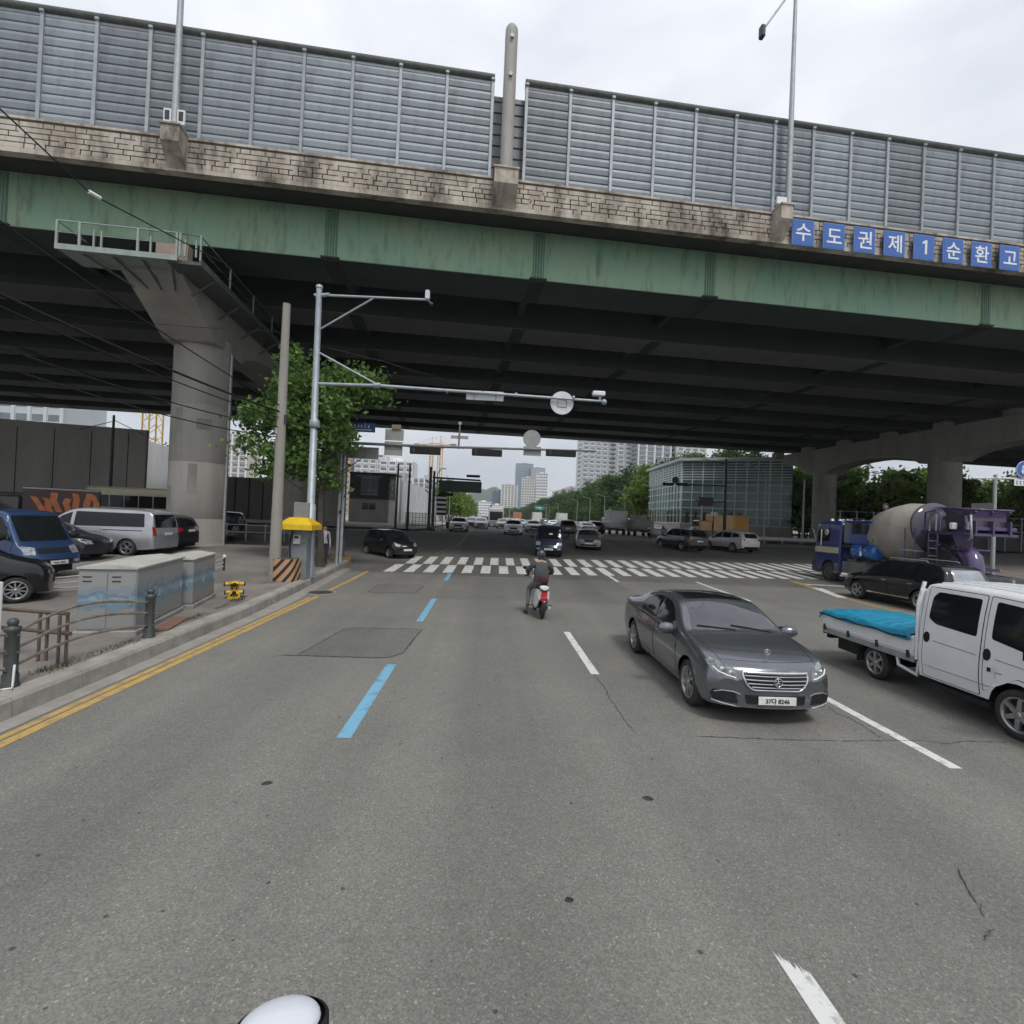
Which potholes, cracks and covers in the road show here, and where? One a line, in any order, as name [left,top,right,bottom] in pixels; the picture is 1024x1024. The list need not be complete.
crack [955,864,994,940]
crack [702,706,1016,744]
